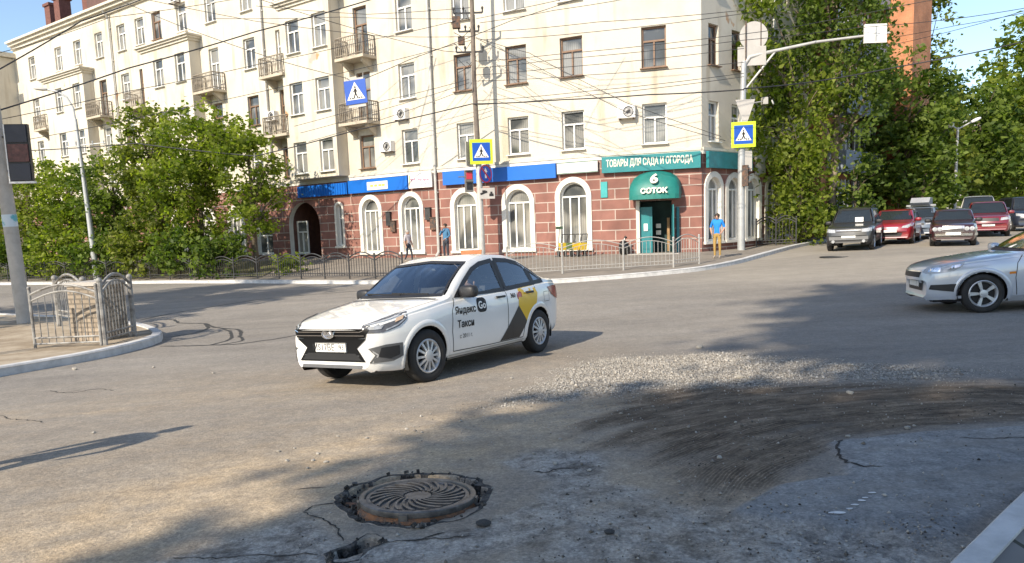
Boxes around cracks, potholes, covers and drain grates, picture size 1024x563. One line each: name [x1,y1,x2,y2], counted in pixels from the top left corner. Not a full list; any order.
manhole cover [357,478,479,526]
crack [181,487,344,559]
pothole [322,533,390,563]
